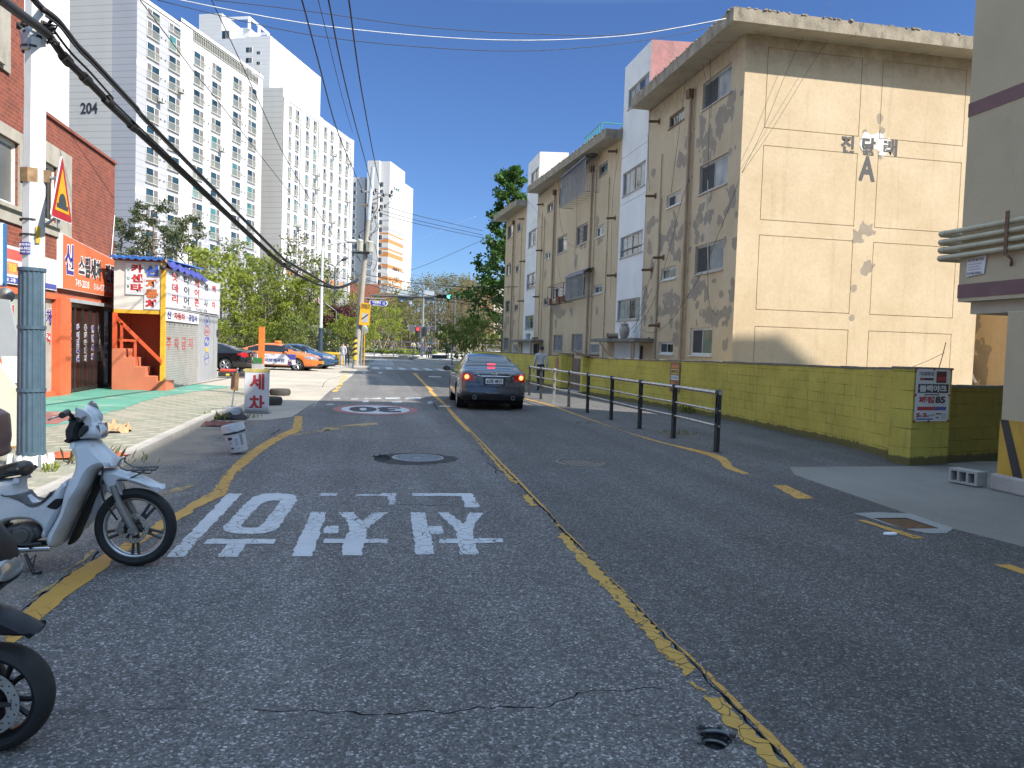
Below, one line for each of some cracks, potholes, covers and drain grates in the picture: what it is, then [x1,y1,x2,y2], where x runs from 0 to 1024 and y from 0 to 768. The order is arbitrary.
crack [401,443,792,768]
manhole cover [392,454,444,462]
drain grate [855,512,953,533]
manhole cover [555,459,605,467]
